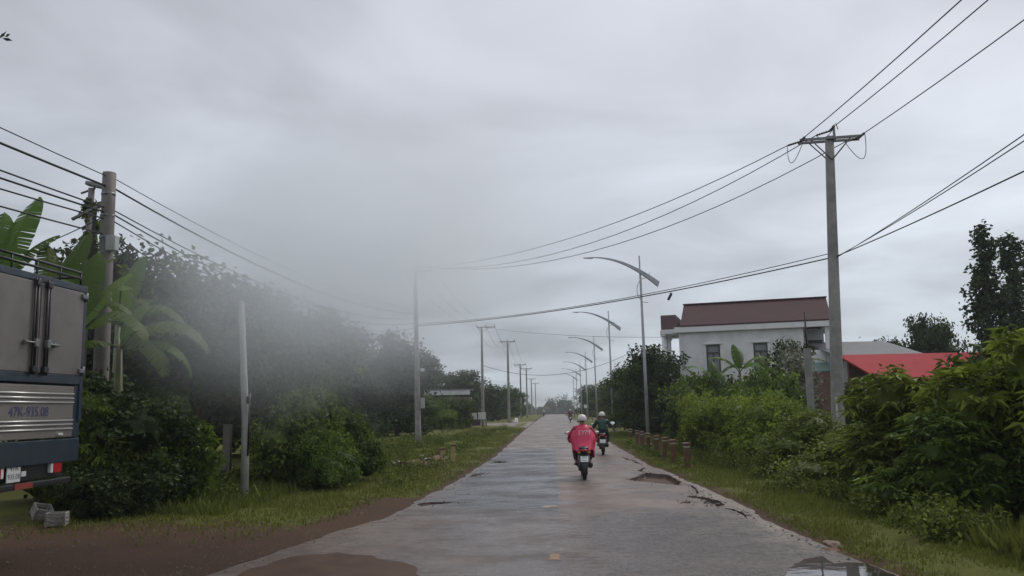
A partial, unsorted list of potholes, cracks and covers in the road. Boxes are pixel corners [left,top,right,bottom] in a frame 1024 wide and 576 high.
pothole [628,473,681,485]
